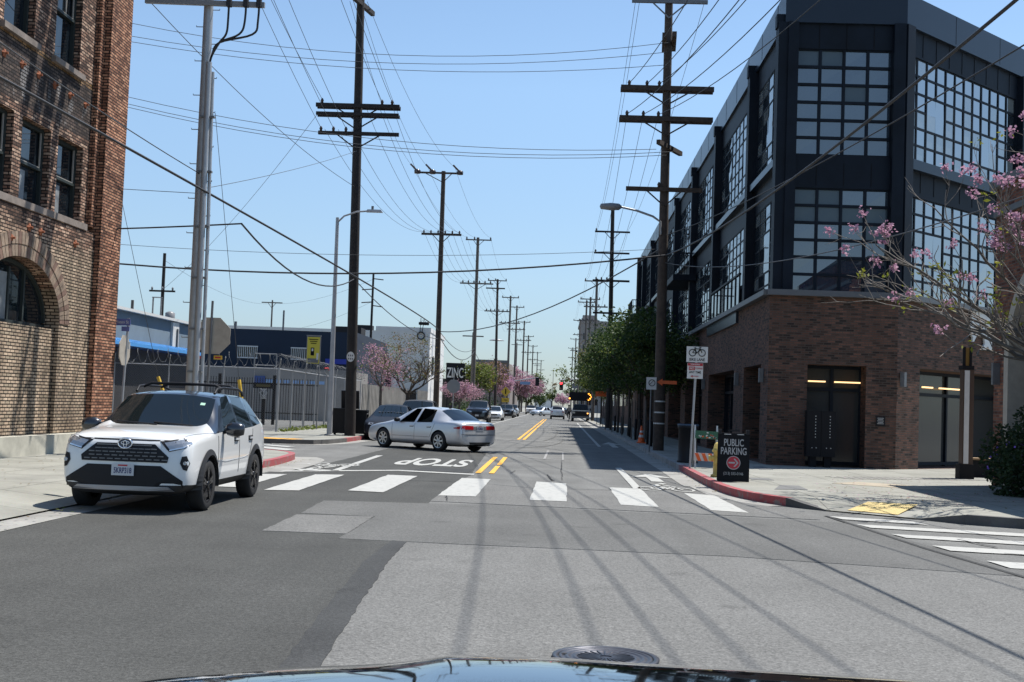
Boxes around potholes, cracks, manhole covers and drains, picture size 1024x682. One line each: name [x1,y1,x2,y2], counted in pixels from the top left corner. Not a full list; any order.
manhole cover [552,646,660,664]
